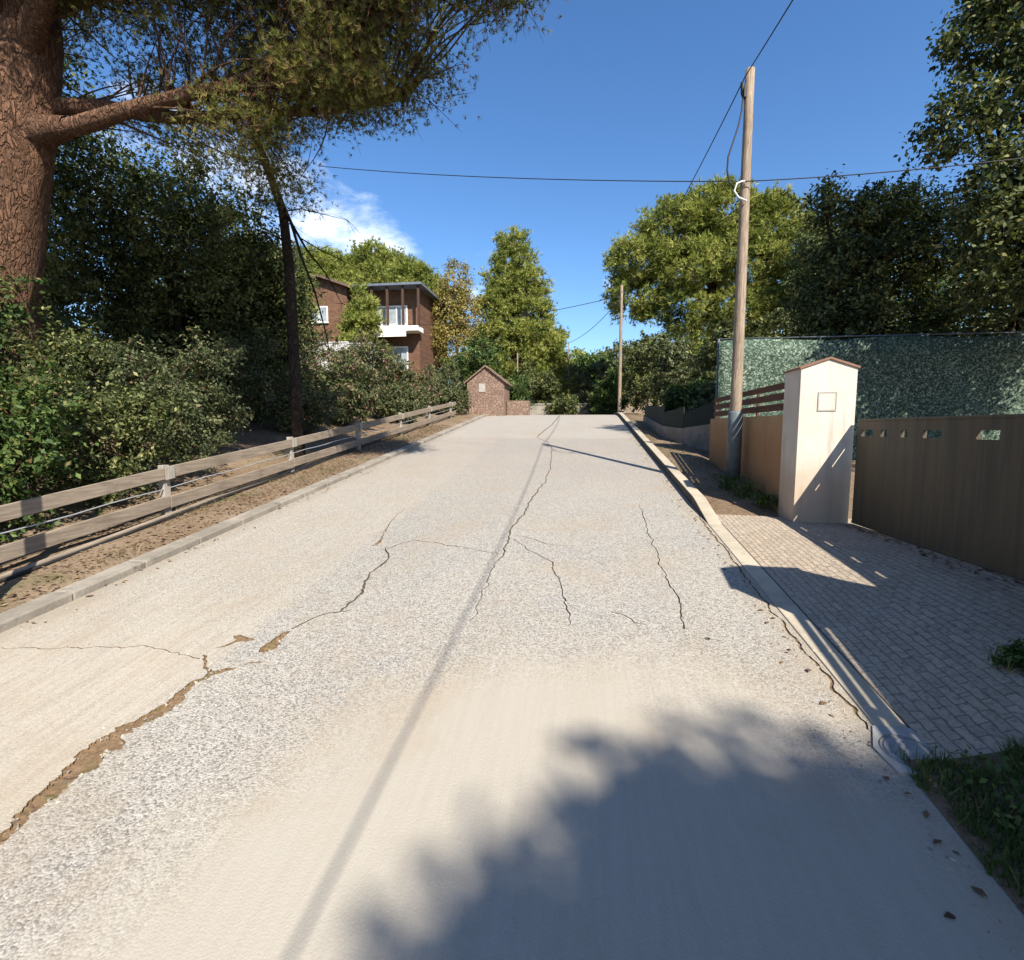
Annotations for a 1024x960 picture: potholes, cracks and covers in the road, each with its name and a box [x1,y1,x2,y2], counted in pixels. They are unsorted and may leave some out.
crack [0,645,263,845]
crack [292,416,571,629]
manhole cover [879,735,937,766]
